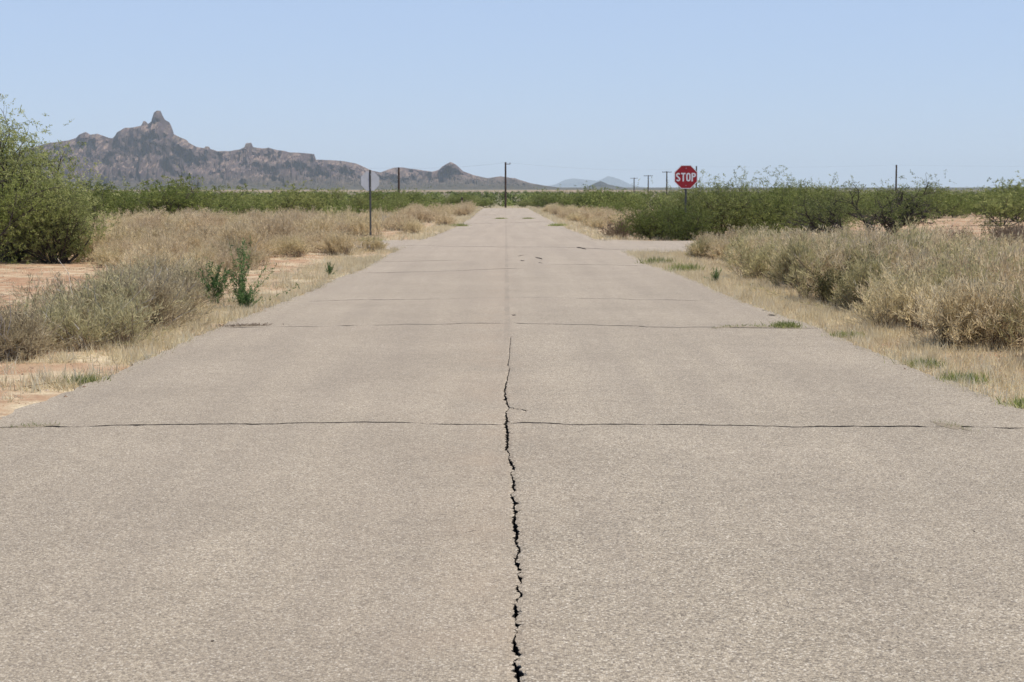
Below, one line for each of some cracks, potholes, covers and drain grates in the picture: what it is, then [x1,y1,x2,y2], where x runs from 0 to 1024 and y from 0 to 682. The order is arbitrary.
crack [0,323,1014,682]
